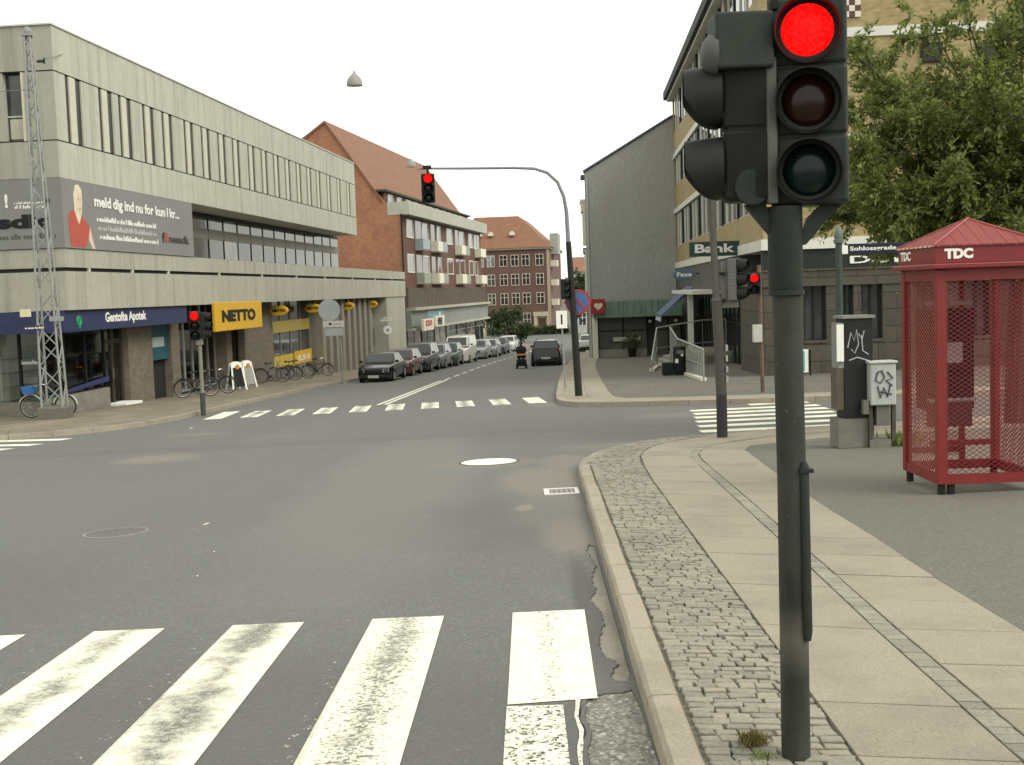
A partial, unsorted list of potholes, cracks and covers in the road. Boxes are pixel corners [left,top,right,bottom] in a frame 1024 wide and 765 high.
manhole cover [458,458,520,466]
manhole cover [82,527,149,538]
crack [578,701,586,754]
pothole [585,690,660,765]
pothole [587,544,631,681]
